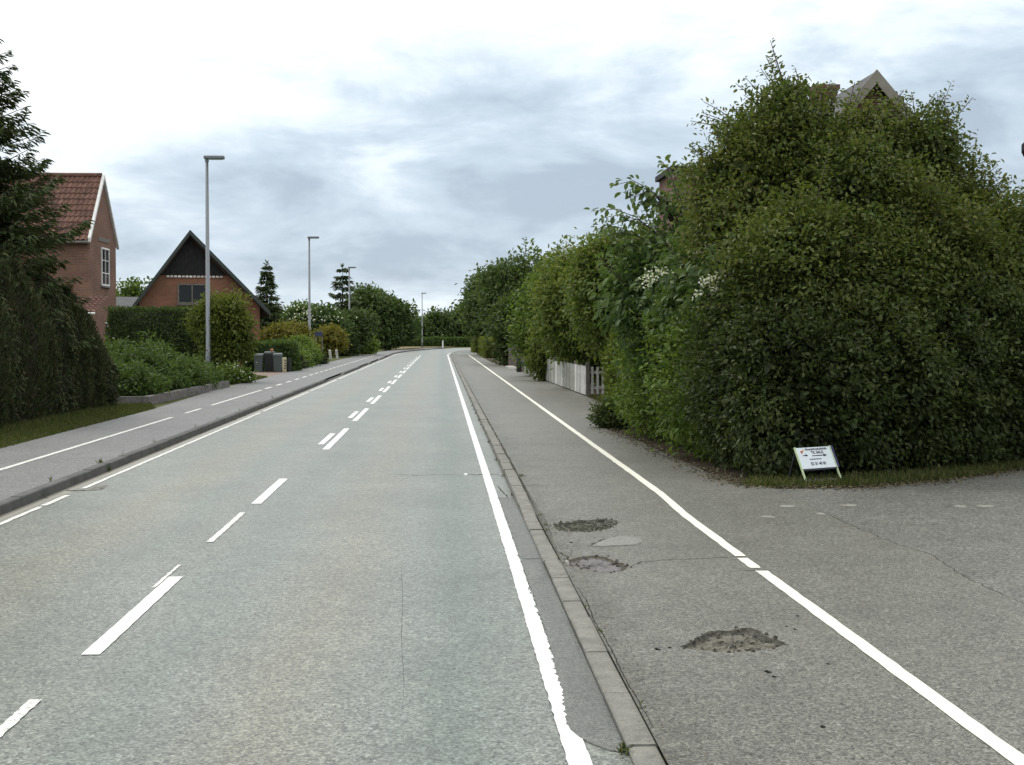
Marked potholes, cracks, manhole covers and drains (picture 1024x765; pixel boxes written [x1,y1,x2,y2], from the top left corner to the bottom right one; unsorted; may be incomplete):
crack [815,508,1022,603]
pothole [550,517,618,532]
pothole [559,555,632,573]
crack [631,556,767,571]
pothole [681,626,788,653]
crack [440,474,508,497]
